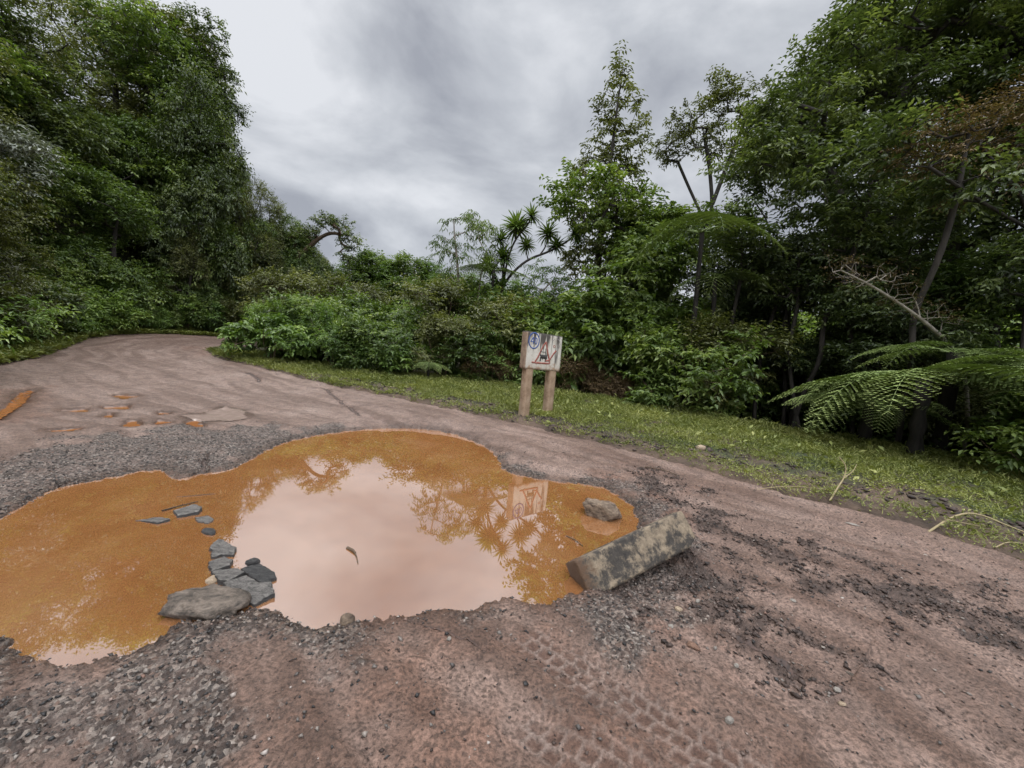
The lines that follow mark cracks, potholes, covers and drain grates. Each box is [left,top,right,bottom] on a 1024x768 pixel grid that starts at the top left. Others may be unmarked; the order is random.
pothole [0,391,33,420]
pothole [0,428,639,667]
